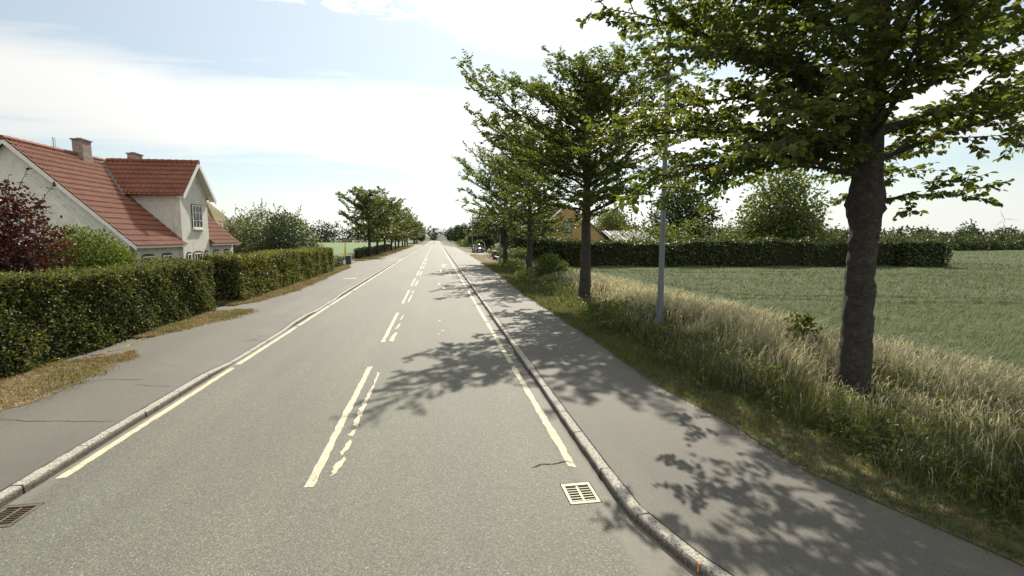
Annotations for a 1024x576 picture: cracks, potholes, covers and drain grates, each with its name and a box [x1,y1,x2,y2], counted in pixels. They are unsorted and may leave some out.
drain grate [0,503,43,528]
drain grate [561,482,601,505]
